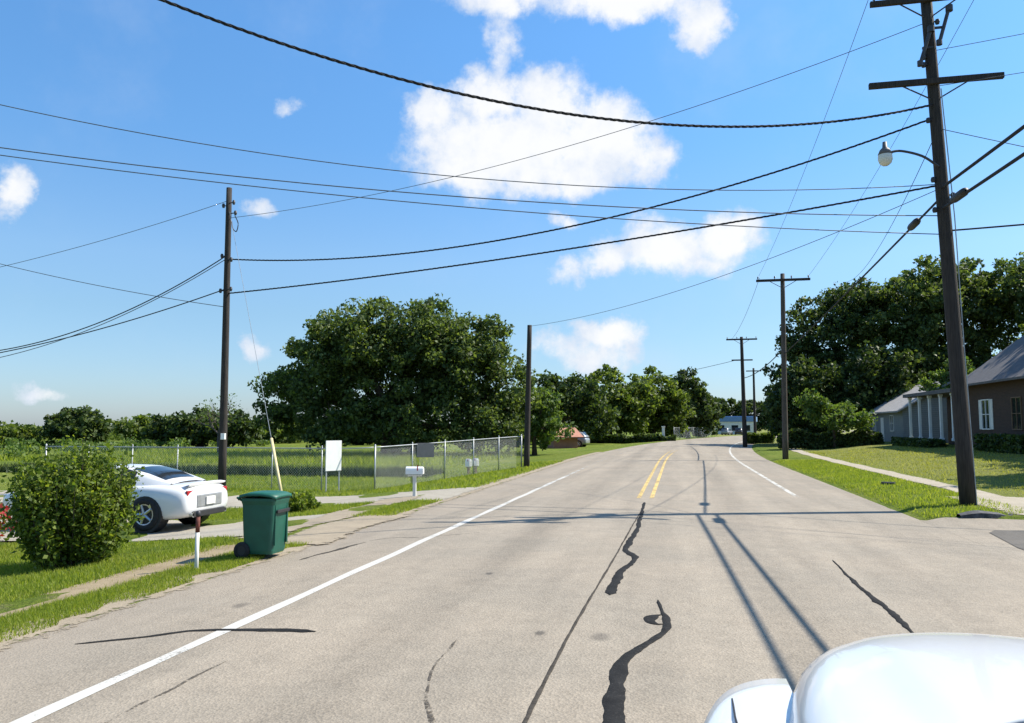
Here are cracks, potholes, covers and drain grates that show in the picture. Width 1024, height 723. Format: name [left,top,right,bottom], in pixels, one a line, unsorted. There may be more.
crack [424,639,457,723]
crack [118,662,224,716]
crack [300,532,479,560]
